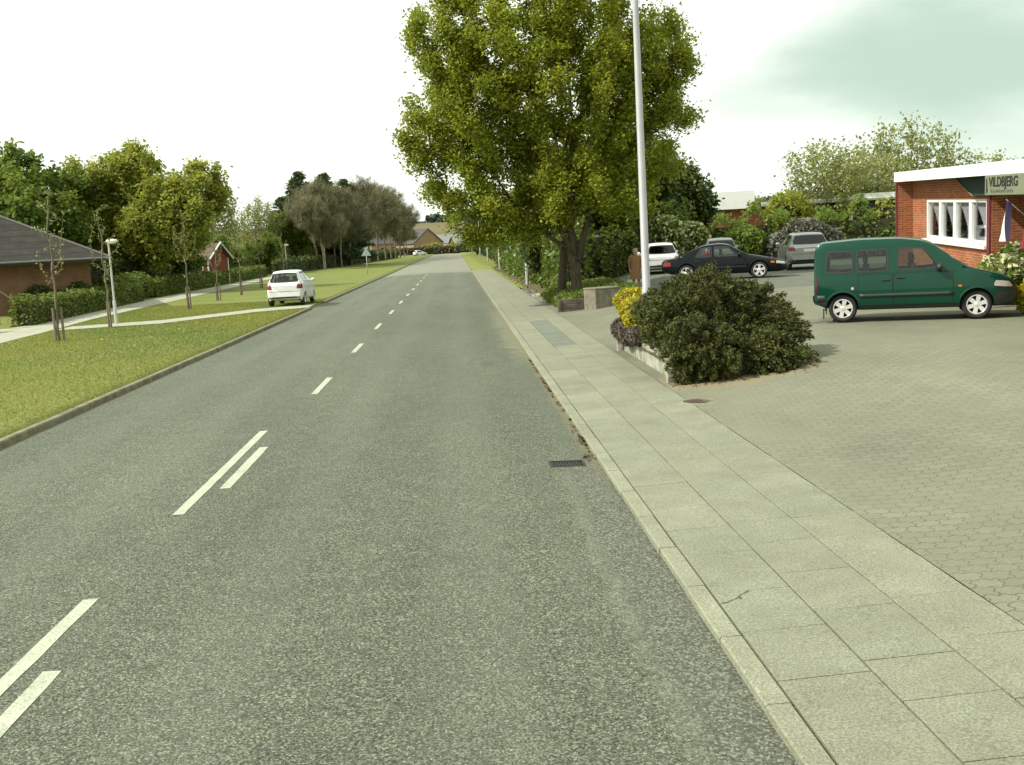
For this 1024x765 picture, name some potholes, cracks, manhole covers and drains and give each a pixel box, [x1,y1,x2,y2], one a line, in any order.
manhole cover [681,398,717,407]
